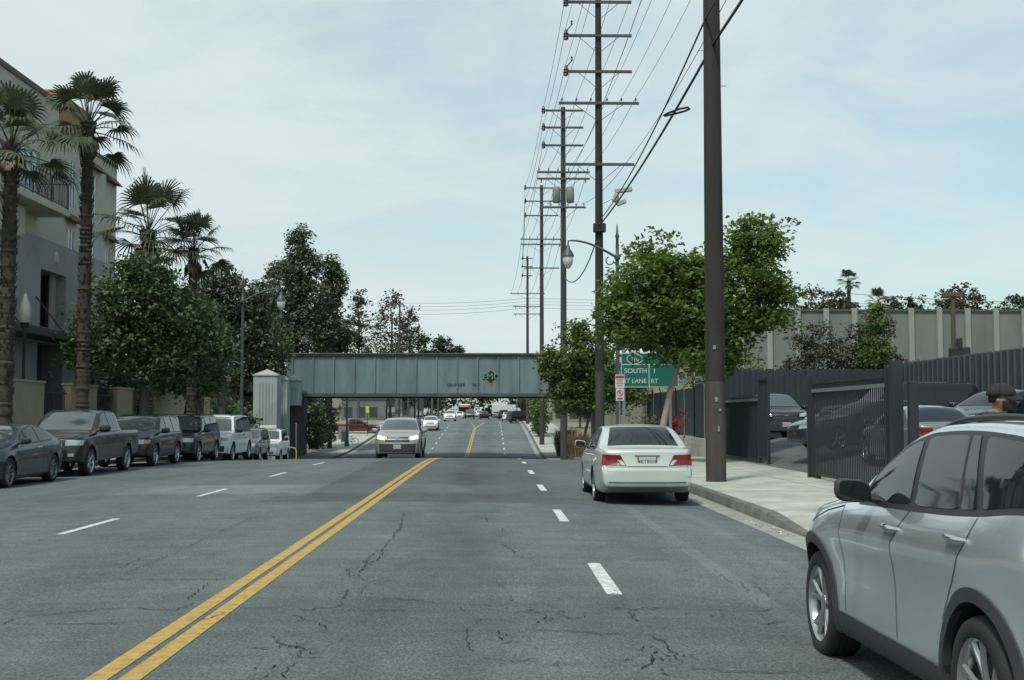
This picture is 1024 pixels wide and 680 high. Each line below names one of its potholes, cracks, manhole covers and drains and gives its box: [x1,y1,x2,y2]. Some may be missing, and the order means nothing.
crack [384,569,782,675]
